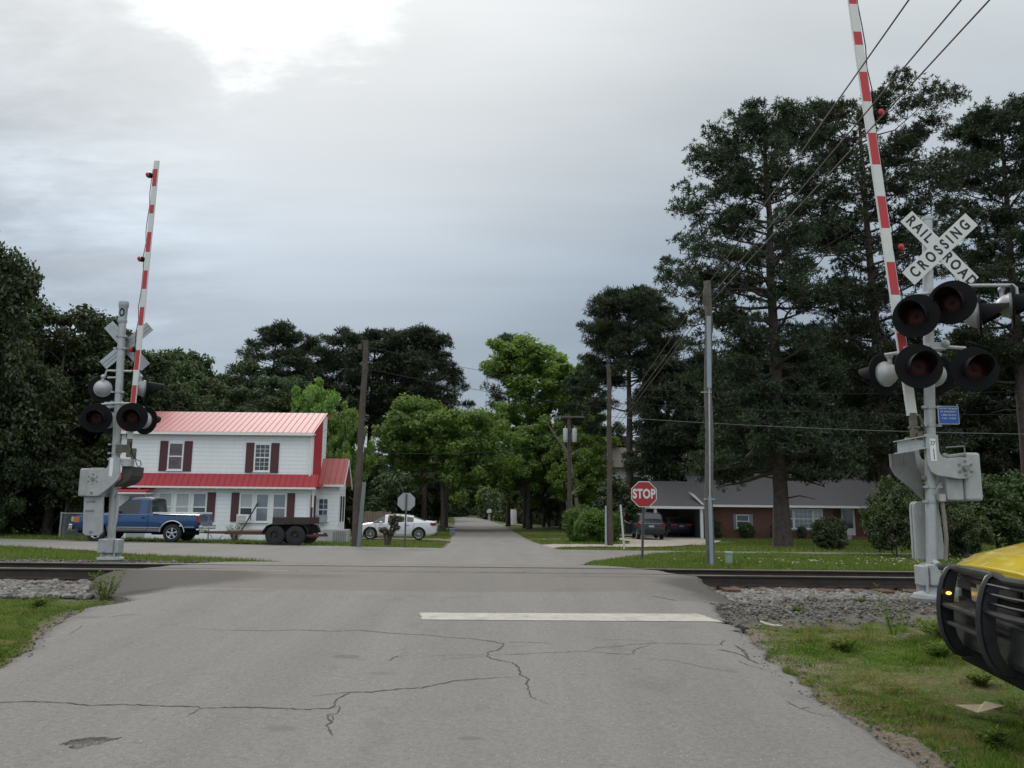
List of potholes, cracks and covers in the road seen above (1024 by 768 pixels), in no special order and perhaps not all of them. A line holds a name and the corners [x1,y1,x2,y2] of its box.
crack [200,628,760,704]
crack [0,676,519,734]
pothole [59,737,122,749]
